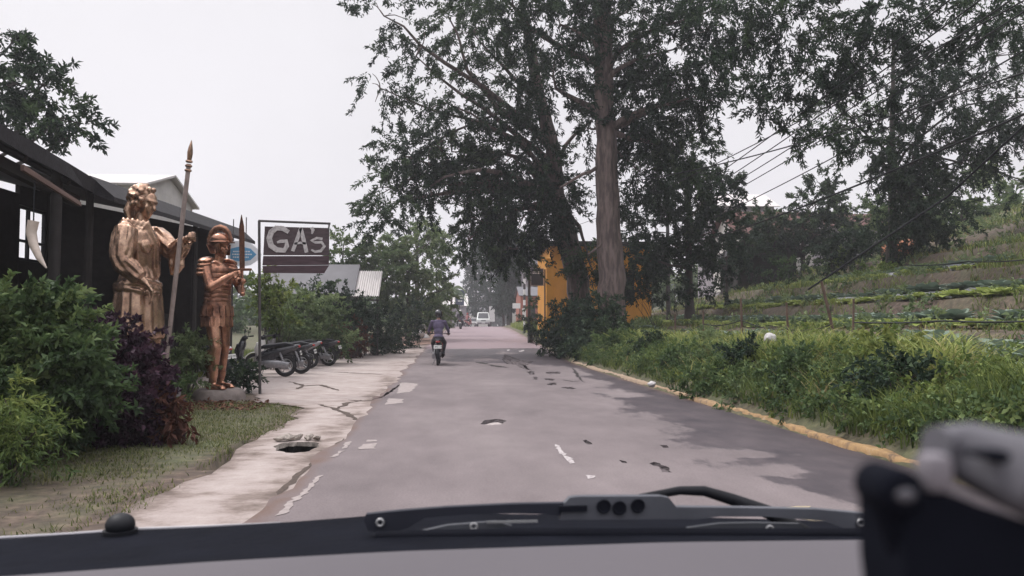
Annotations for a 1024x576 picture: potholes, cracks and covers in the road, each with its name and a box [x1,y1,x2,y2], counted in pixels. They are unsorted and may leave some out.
crack [293,382,403,420]
pothole [274,442,319,453]
